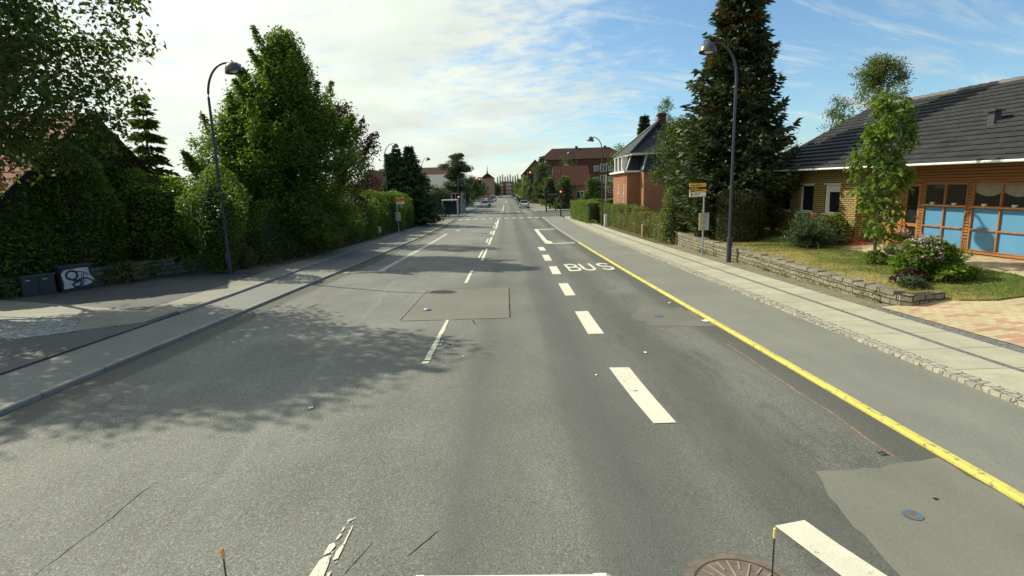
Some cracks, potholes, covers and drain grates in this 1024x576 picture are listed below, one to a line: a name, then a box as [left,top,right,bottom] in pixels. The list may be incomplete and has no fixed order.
manhole cover [684,553,790,576]
utility cover [901,509,924,520]
crack [36,483,156,575]
